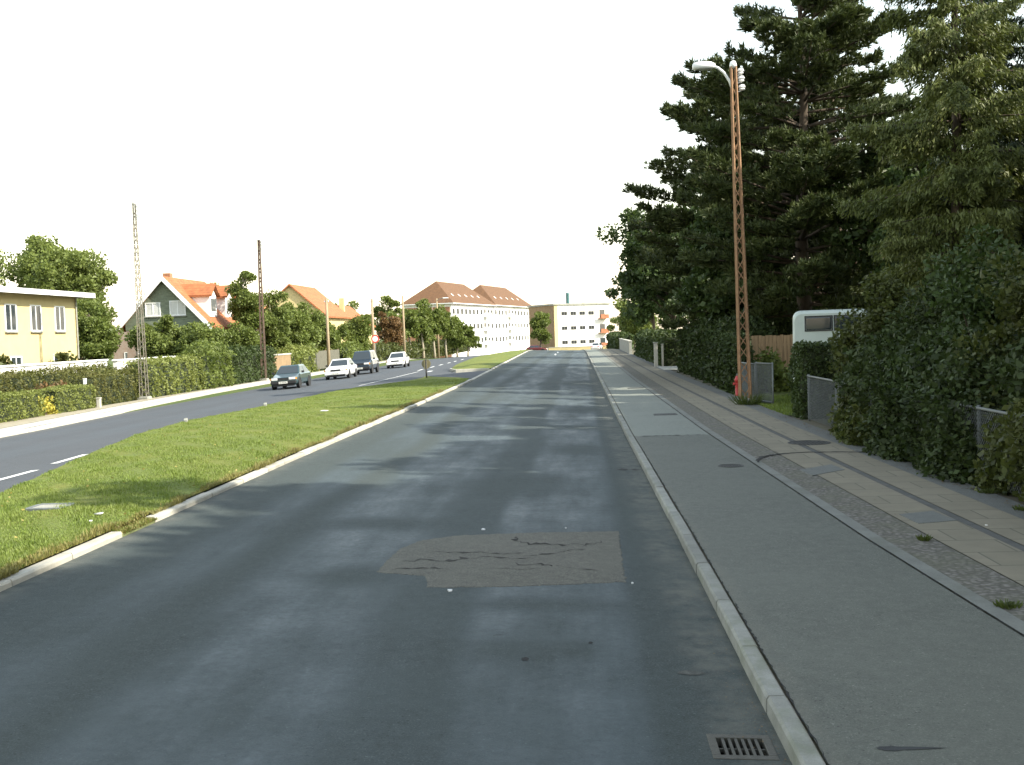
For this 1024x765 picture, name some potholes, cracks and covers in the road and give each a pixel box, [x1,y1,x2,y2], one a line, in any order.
drain grate [706,734,780,761]
crack [396,537,602,570]
